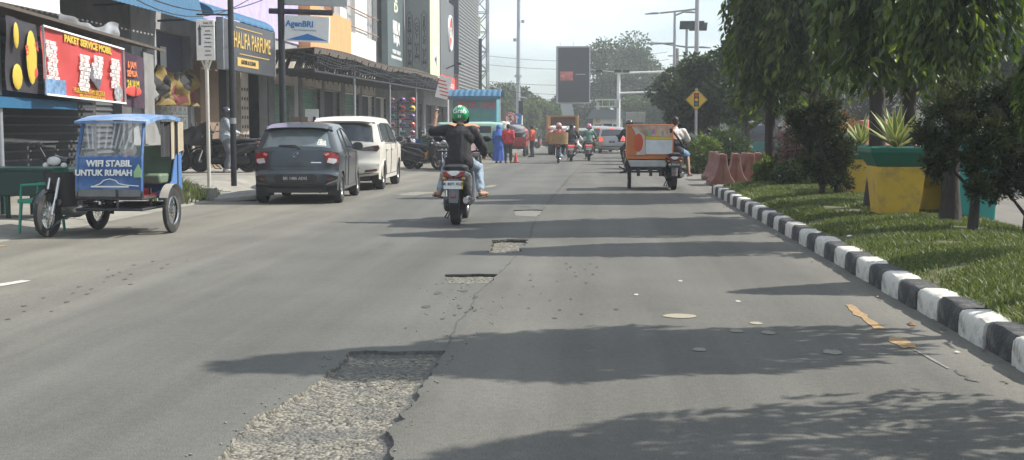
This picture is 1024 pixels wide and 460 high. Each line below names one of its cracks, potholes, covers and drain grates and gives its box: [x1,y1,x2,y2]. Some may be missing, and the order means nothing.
pothole [216,350,446,460]
pothole [444,274,498,284]
pothole [487,239,528,254]
